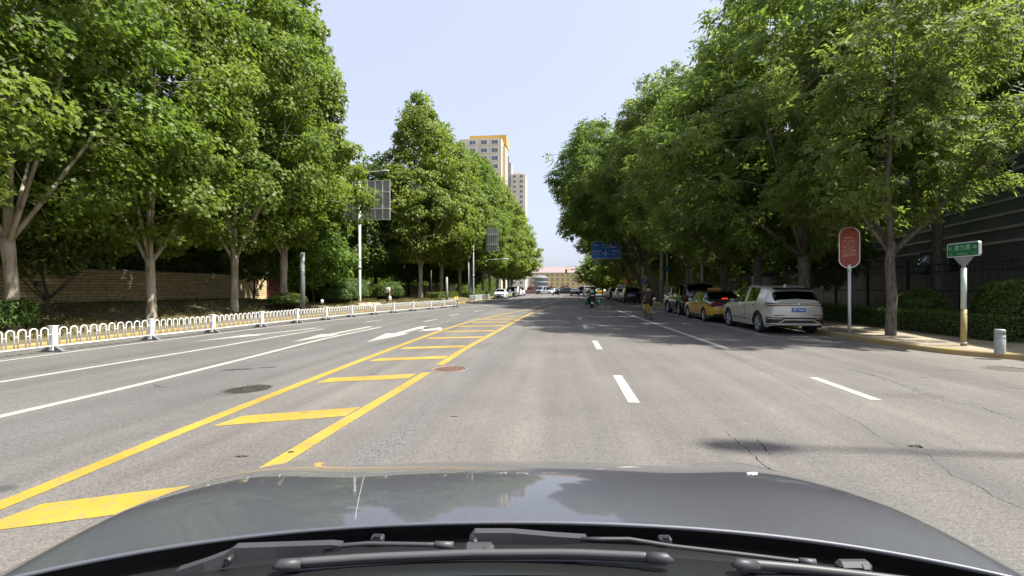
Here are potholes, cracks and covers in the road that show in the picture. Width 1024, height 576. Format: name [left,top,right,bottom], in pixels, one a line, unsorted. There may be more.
manhole cover [221,384,273,394]
crack [672,328,1023,509]
